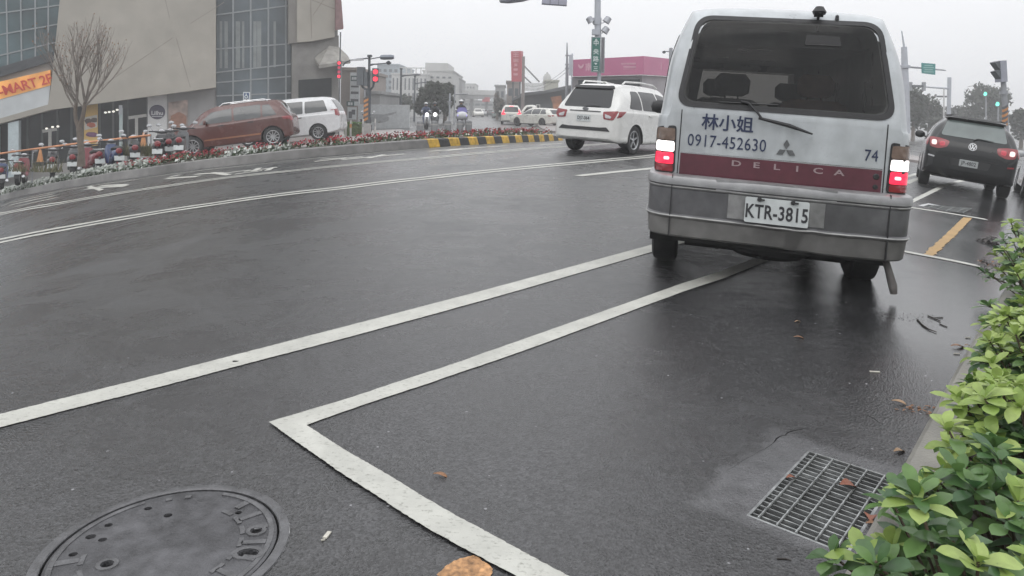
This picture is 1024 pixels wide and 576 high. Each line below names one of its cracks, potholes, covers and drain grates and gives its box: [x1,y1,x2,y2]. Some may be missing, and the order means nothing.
manhole cover [26,485,289,576]
crack [730,428,806,469]
drain grate [924,205,972,215]
drain grate [747,451,889,551]
